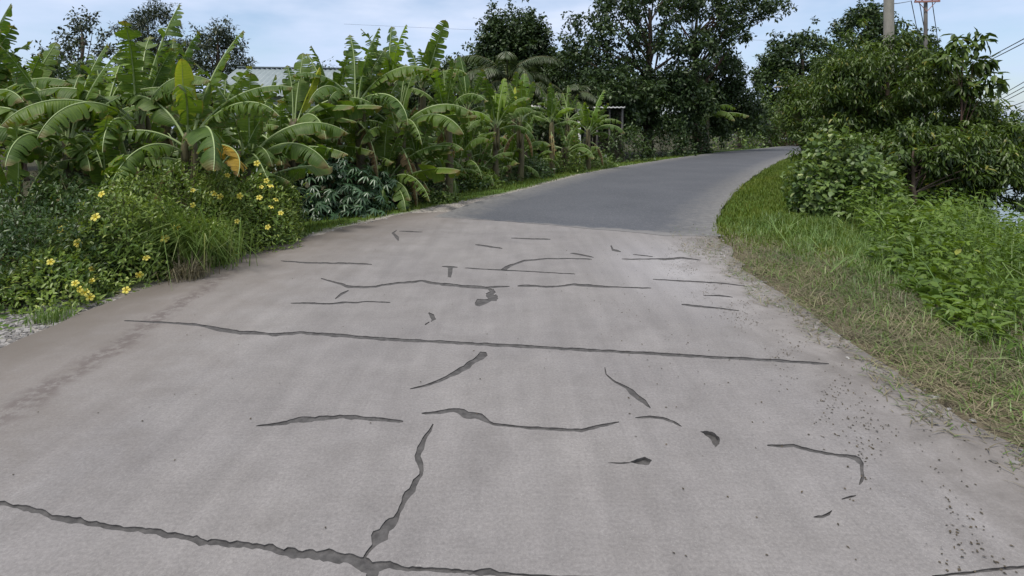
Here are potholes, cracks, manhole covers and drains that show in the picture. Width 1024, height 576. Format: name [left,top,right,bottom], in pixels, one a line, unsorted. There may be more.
crack [410,352,488,389]
crack [767,444,864,518]
crack [283,238,747,325]
crack [0,369,682,576]
crack [932,565,1024,576]
